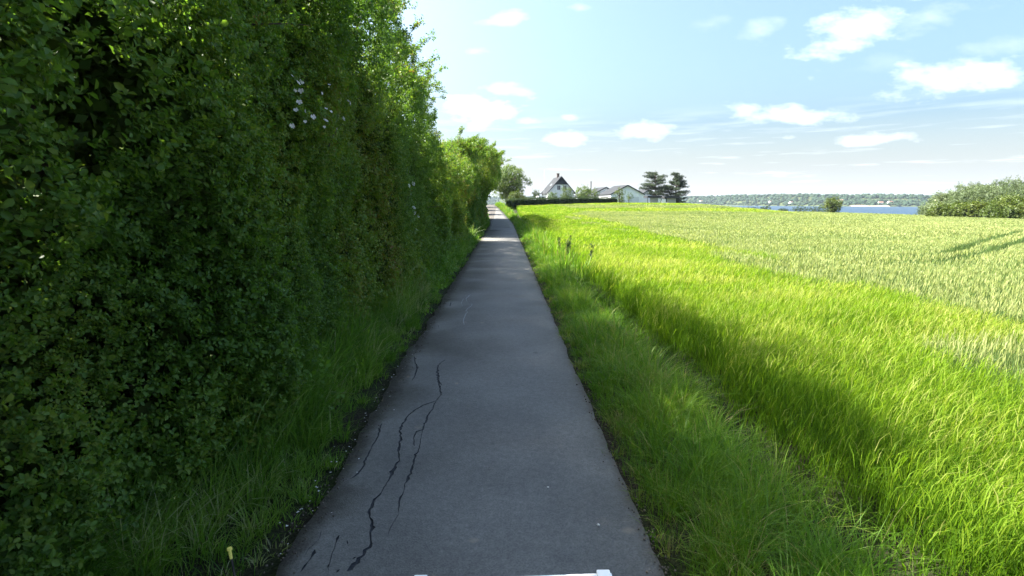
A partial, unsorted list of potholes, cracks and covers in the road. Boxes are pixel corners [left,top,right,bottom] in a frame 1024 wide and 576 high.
crack [301,360,445,573]
